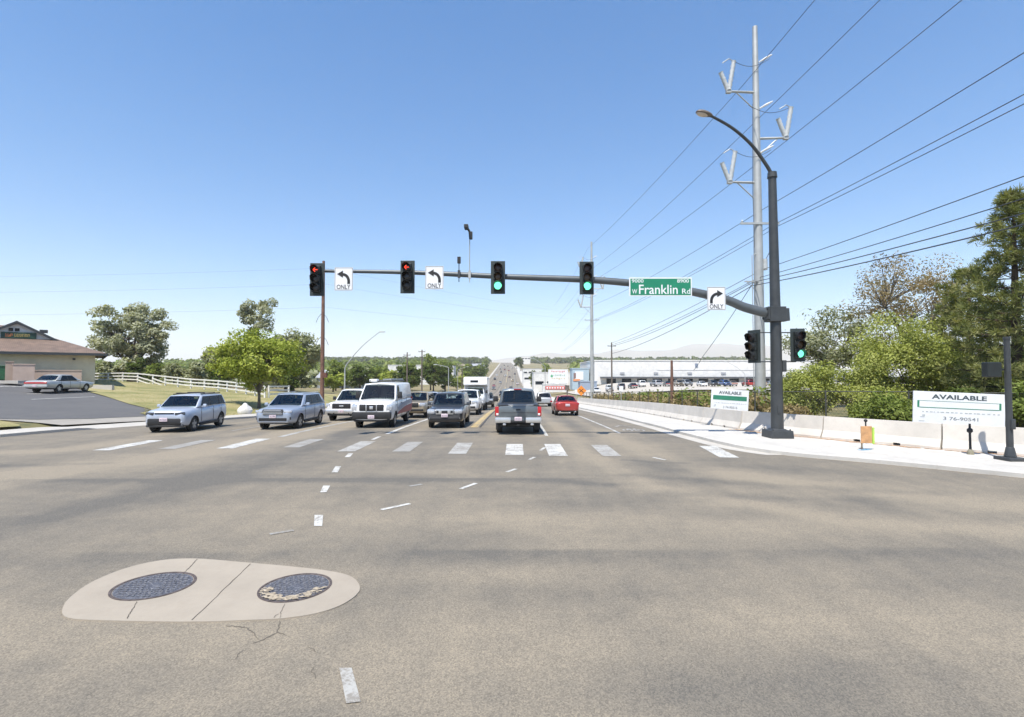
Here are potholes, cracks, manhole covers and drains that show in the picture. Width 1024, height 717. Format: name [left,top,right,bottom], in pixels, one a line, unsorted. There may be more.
crack [226,604,285,659]
manhole cover [108,572,197,601]
manhole cover [257,573,332,603]
